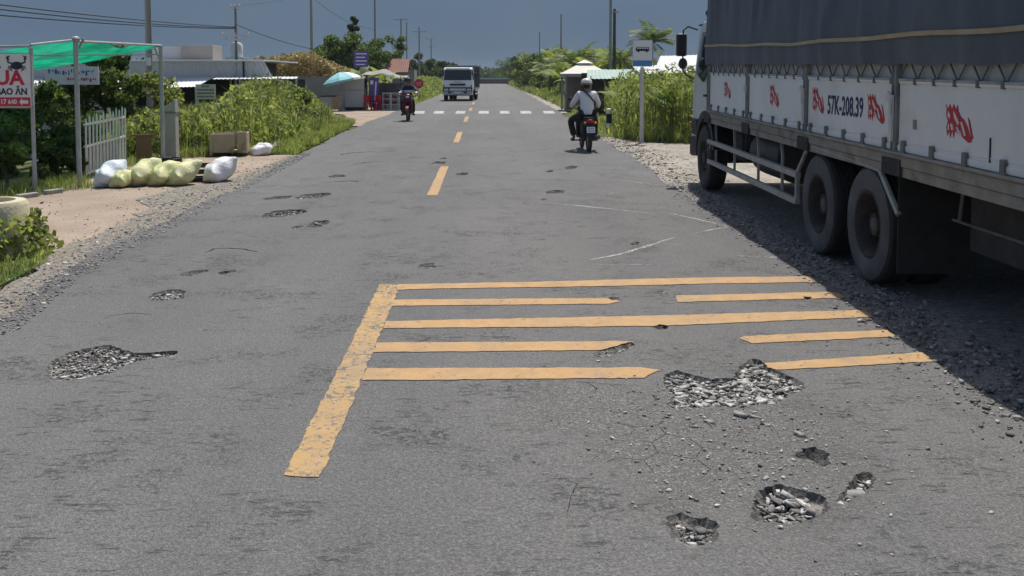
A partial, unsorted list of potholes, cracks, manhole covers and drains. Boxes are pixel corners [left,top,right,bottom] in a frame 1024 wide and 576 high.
pothole [306,220,331,228]
pothole [149,289,186,301]
pothole [836,471,877,506]
pothole [45,345,178,381]
pothole [592,343,635,358]
pothole [794,447,831,467]
pothole [749,484,830,525]
pothole [666,512,720,548]
pothole [663,359,805,411]
crack [608,421,728,476]
pothole [262,209,307,218]
